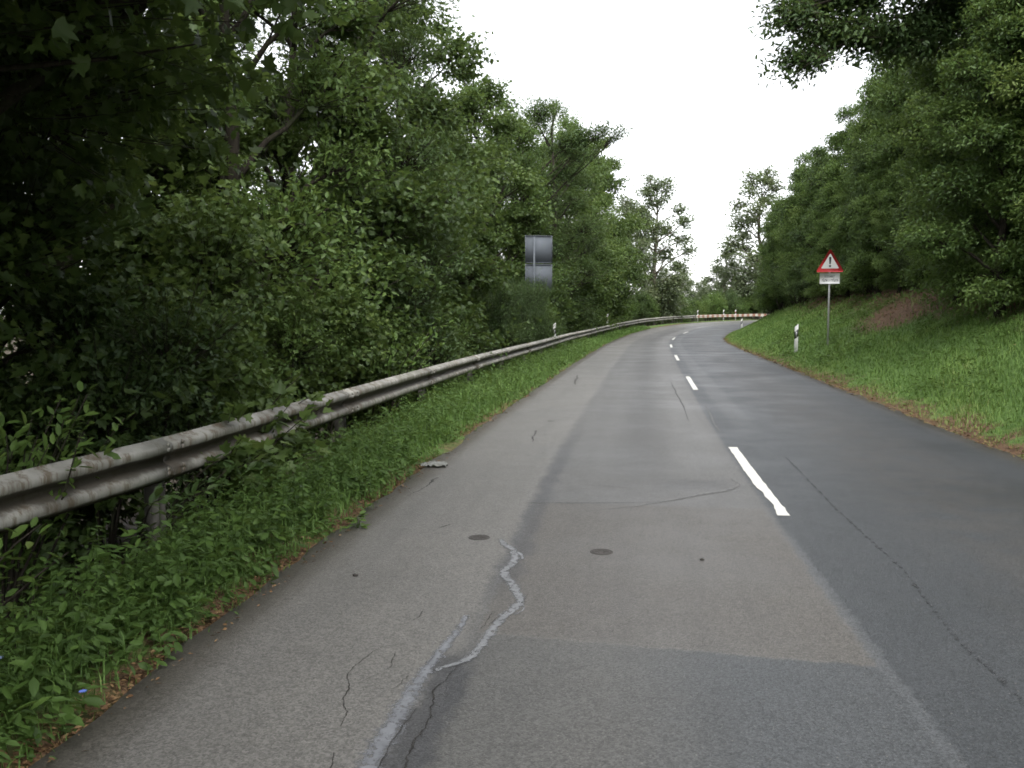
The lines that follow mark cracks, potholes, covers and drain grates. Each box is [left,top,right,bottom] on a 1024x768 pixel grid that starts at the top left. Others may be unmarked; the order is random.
crack [786,457,1021,701]
crack [378,664,460,768]
crack [340,642,409,726]
